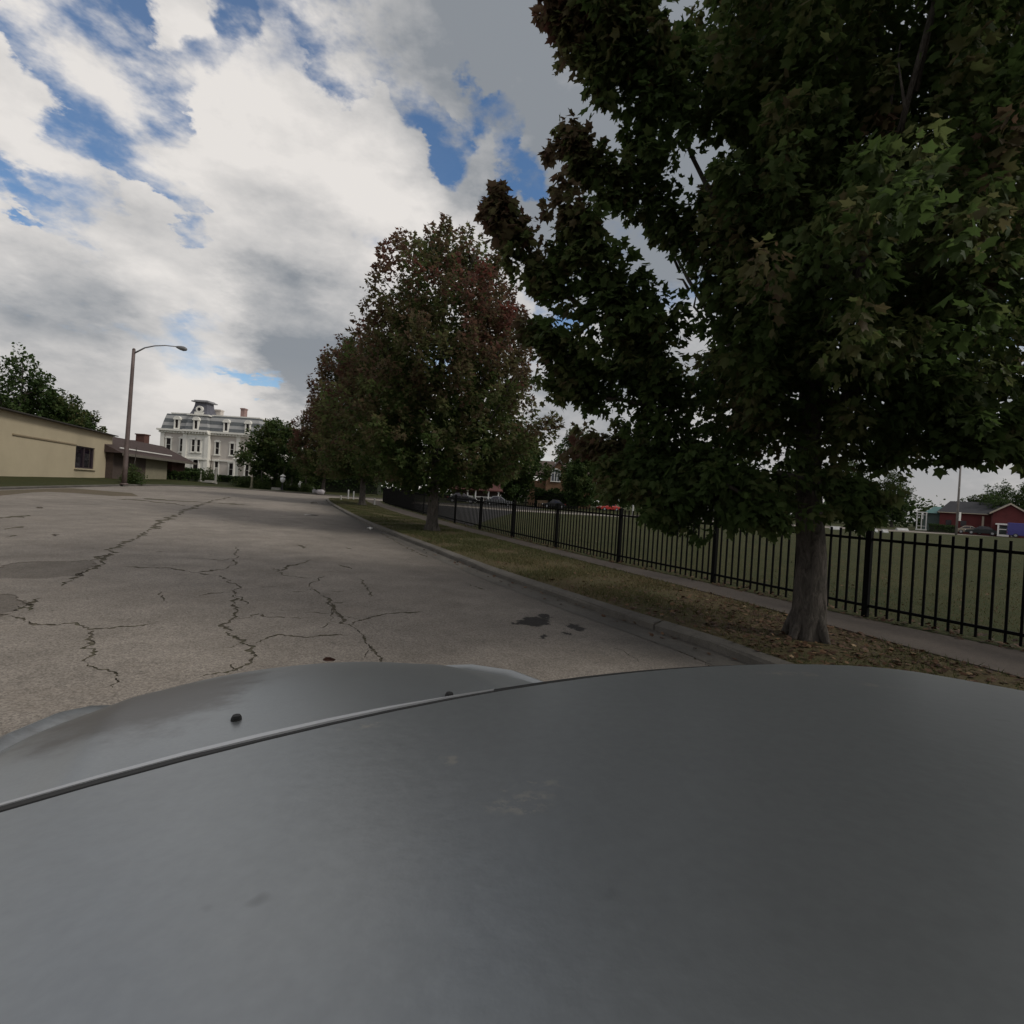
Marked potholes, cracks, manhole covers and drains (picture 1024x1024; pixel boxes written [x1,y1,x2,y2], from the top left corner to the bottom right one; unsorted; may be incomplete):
crack [136,545,417,677]
crack [12,598,154,688]
crack [61,497,244,586]
